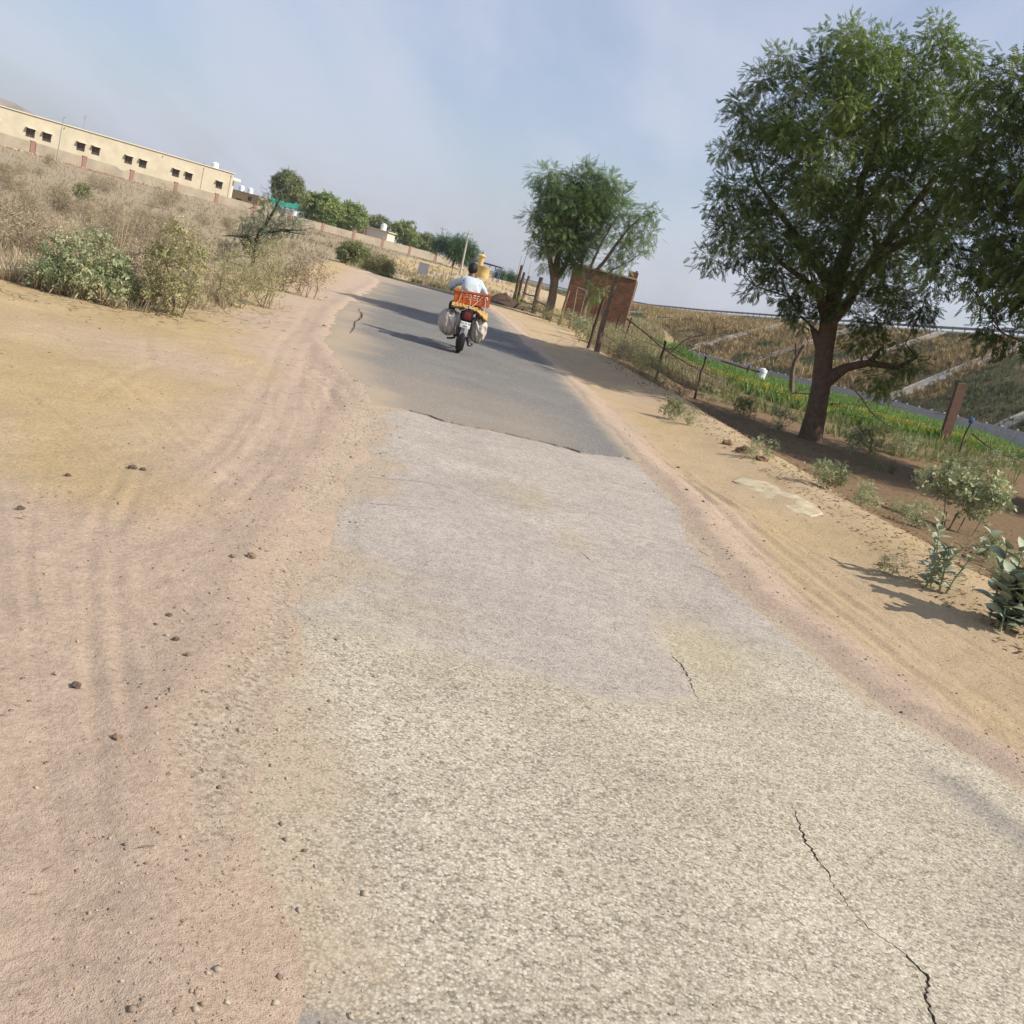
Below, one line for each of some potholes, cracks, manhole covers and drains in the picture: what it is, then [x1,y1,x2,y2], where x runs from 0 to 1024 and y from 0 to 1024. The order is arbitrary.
crack [673,657,698,699]
crack [350,309,363,334]
crack [789,805,937,1024]
